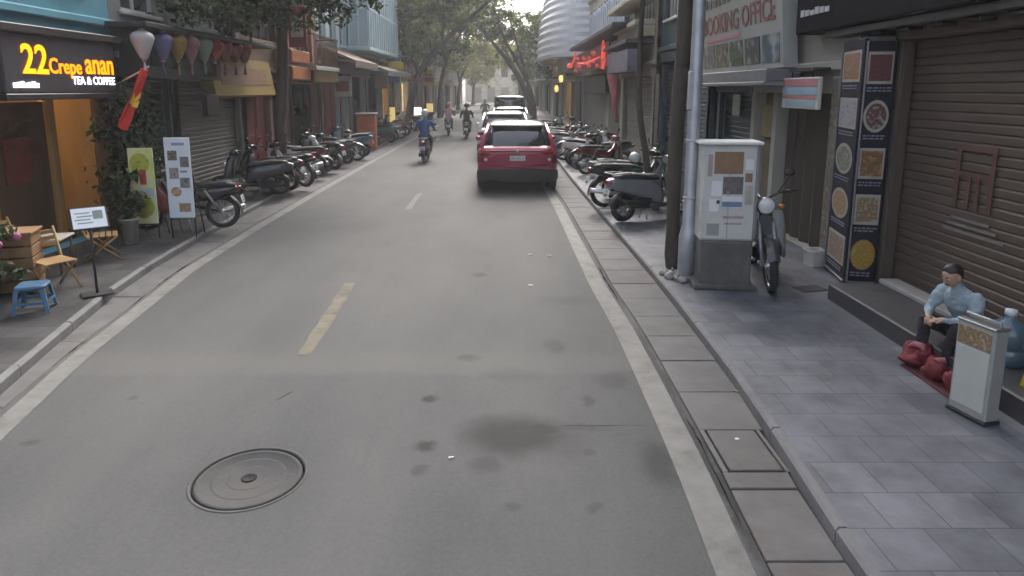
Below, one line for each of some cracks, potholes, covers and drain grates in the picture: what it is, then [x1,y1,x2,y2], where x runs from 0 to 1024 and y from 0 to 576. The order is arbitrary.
manhole cover [699,430,790,475]
manhole cover [186,447,308,513]
